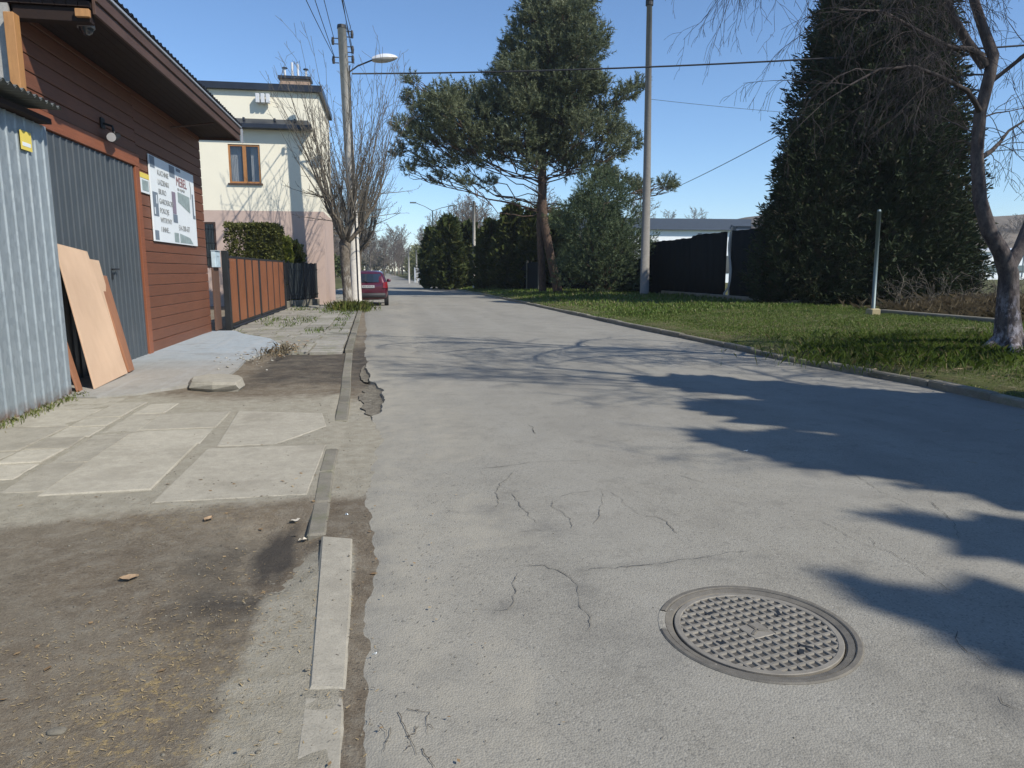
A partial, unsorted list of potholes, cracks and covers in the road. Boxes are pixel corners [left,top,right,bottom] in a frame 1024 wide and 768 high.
crack [495,564,591,629]
pothole [360,365,371,382]
crack [478,460,676,533]
crack [587,551,741,570]
manhole cover [658,586,864,685]
pothole [359,384,384,416]
